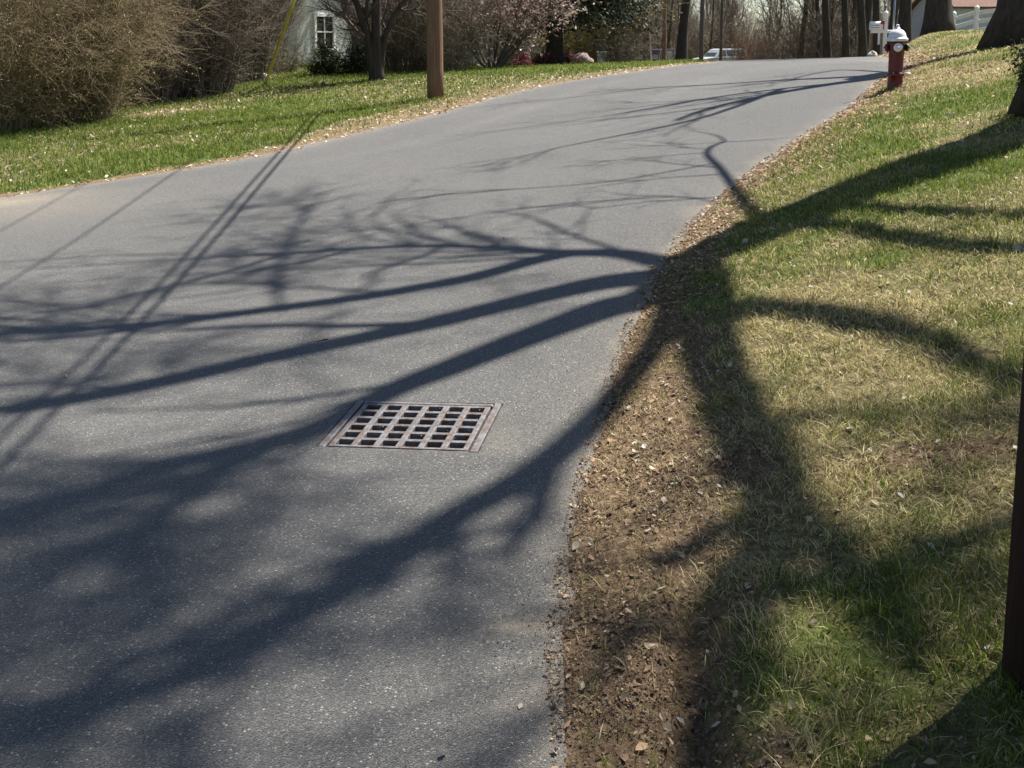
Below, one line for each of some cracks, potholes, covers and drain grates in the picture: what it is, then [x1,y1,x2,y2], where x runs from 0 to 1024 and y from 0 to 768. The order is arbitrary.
drain grate [317,400,502,453]
